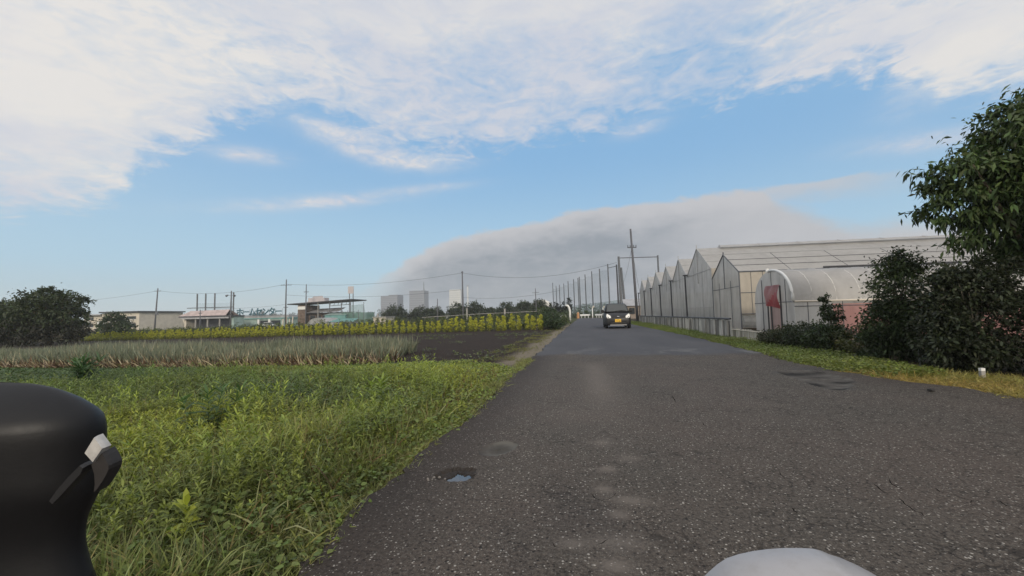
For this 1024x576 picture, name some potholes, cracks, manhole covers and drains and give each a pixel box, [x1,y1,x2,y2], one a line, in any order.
pothole [427,467,477,482]
crack [873,479,1007,524]
